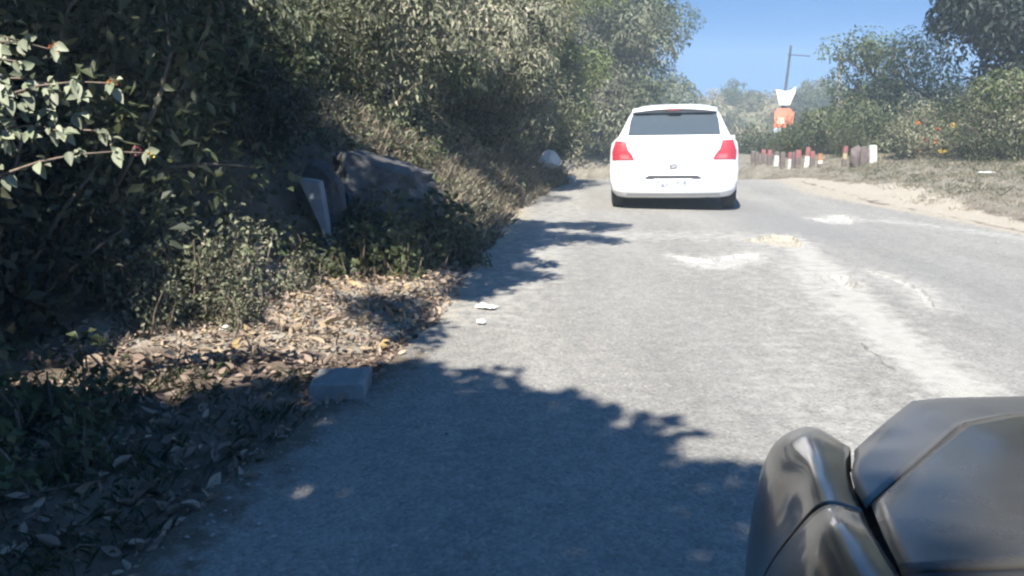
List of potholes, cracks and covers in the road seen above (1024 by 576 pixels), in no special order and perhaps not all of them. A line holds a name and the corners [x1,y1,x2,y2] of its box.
crack [866,270,936,310]
crack [860,343,896,372]
pothole [741,235,803,248]
